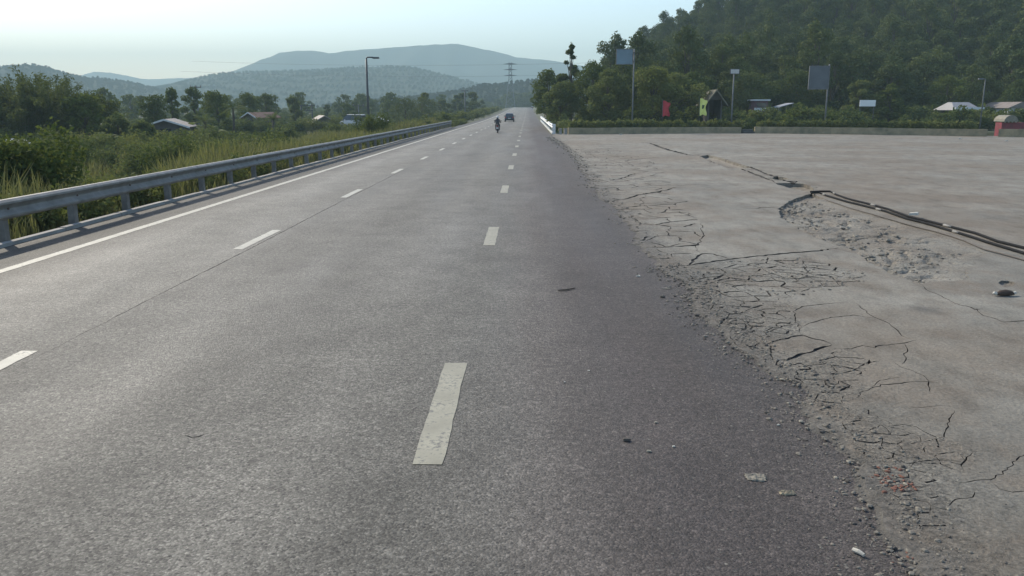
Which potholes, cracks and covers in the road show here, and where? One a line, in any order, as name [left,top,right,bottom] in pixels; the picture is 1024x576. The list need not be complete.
crack [583,142,1024,530]
pothole [778,194,986,284]
